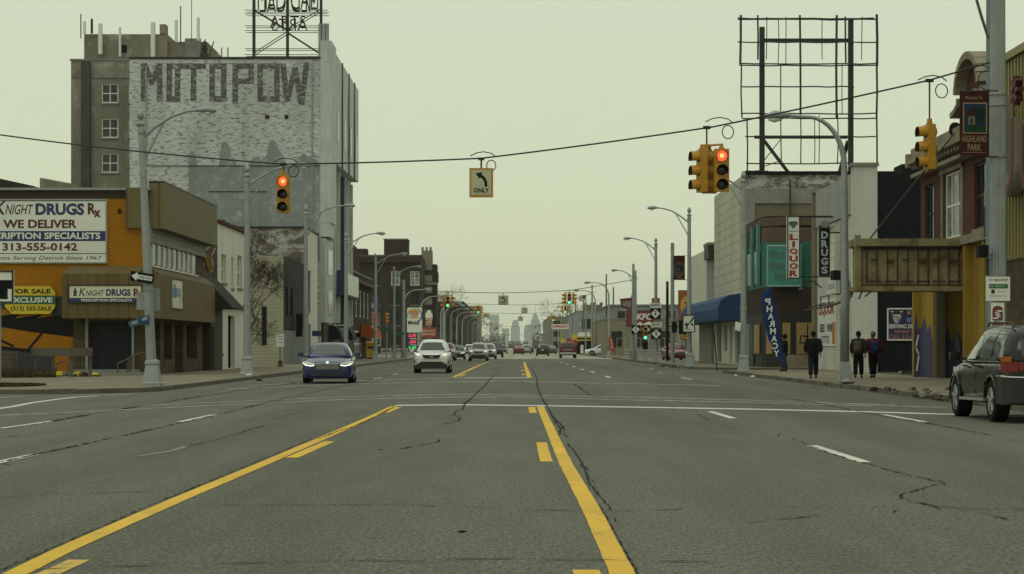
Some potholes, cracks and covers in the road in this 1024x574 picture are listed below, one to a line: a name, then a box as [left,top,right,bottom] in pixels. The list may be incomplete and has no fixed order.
crack [43,365,1024,574]
